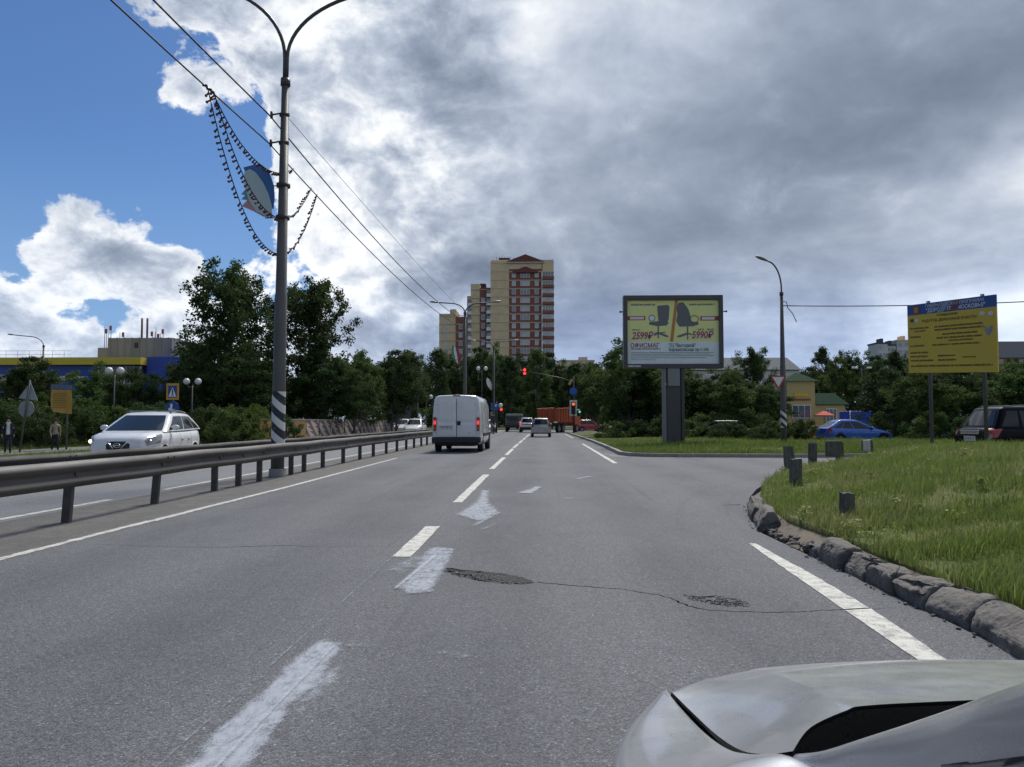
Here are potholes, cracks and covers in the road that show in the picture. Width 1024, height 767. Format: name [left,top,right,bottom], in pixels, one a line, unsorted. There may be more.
crack [537,582,882,613]
